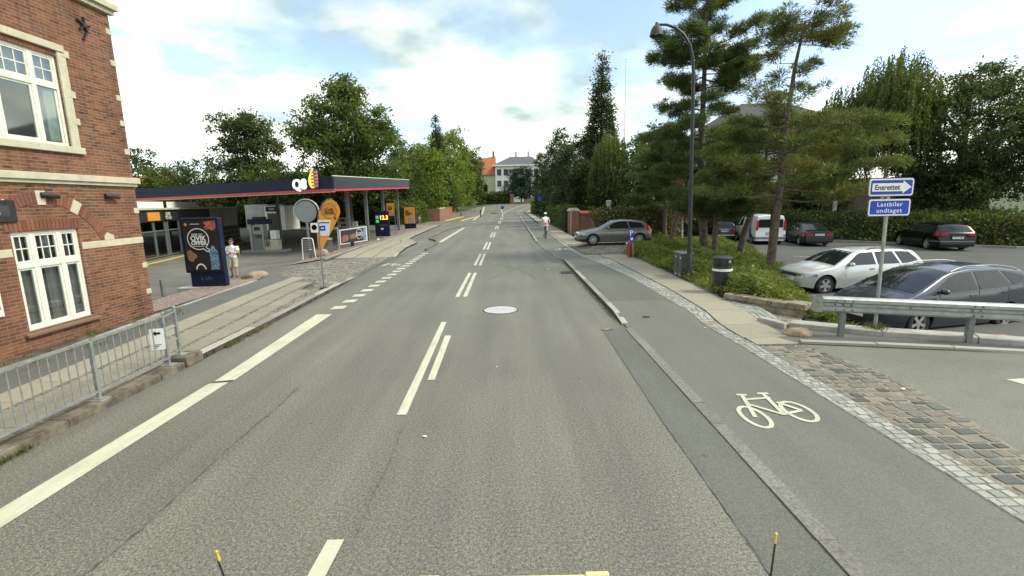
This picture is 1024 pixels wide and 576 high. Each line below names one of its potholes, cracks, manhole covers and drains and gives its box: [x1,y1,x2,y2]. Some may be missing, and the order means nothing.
manhole cover [483,306,518,314]
crack [354,426,403,537]
